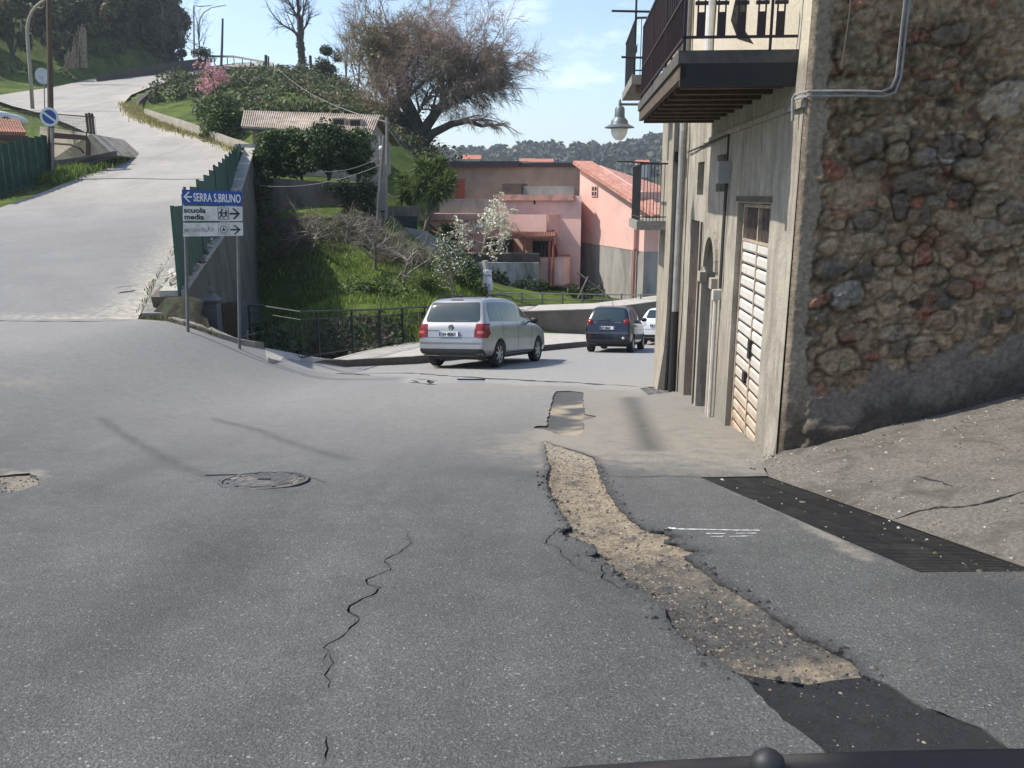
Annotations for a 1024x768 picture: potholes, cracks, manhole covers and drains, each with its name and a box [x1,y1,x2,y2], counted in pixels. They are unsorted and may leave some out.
pothole [0,473,40,493]
crack [545,530,623,591]
drain grate [640,386,673,395]
crack [321,534,412,766]
crack [915,476,954,488]
drain grate [701,476,1024,572]
manhole cover [206,471,327,490]
pothole [544,442,863,685]
